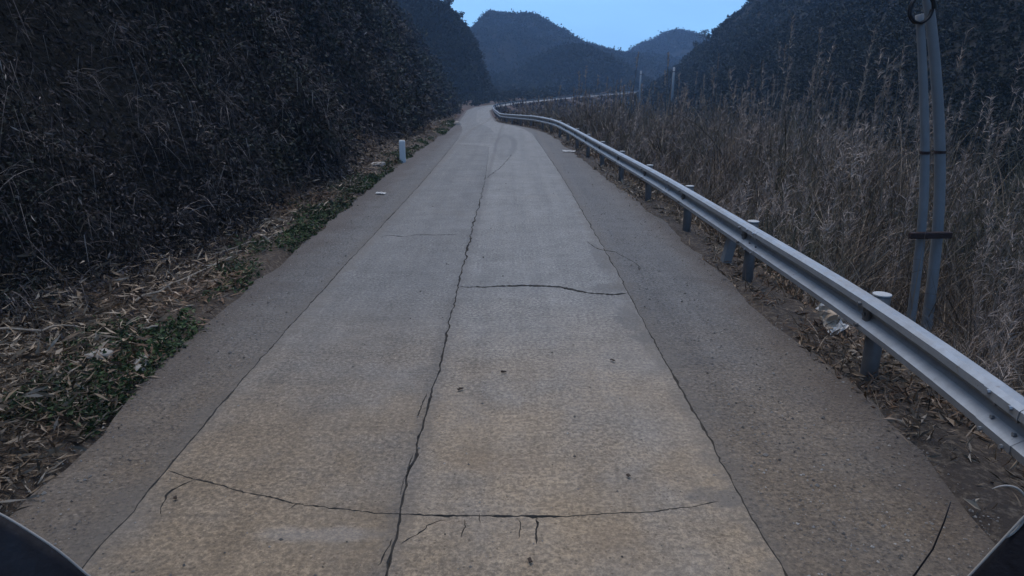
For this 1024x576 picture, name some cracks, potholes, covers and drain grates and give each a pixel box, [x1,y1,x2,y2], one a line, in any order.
crack [82,139,788,576]
